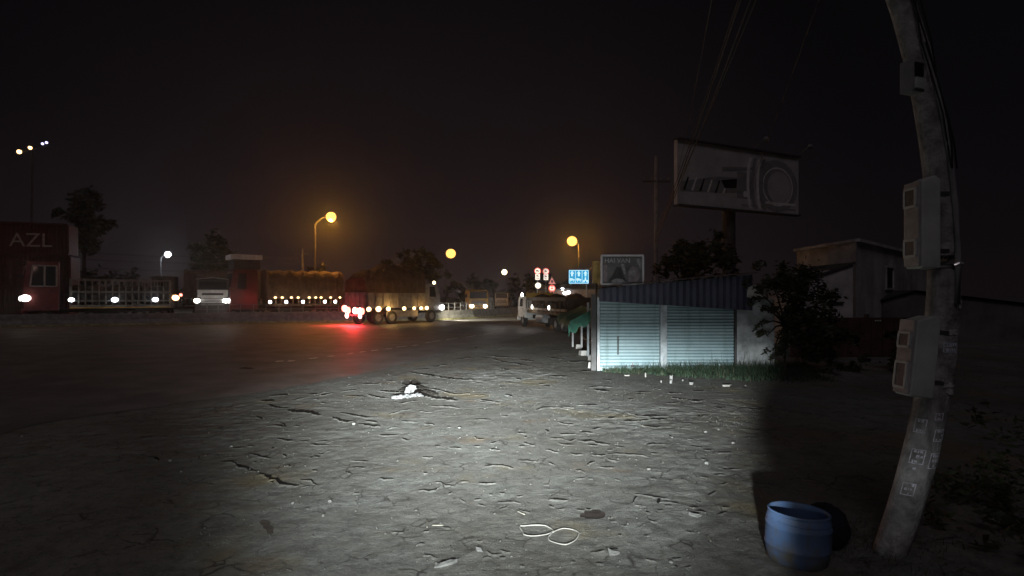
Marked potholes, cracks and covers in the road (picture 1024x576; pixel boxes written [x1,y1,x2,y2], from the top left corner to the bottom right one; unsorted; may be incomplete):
crack [645,557,692,570]
pothole [399,384,438,396]
crack [219,347,764,566]
pothole [580,510,605,519]
